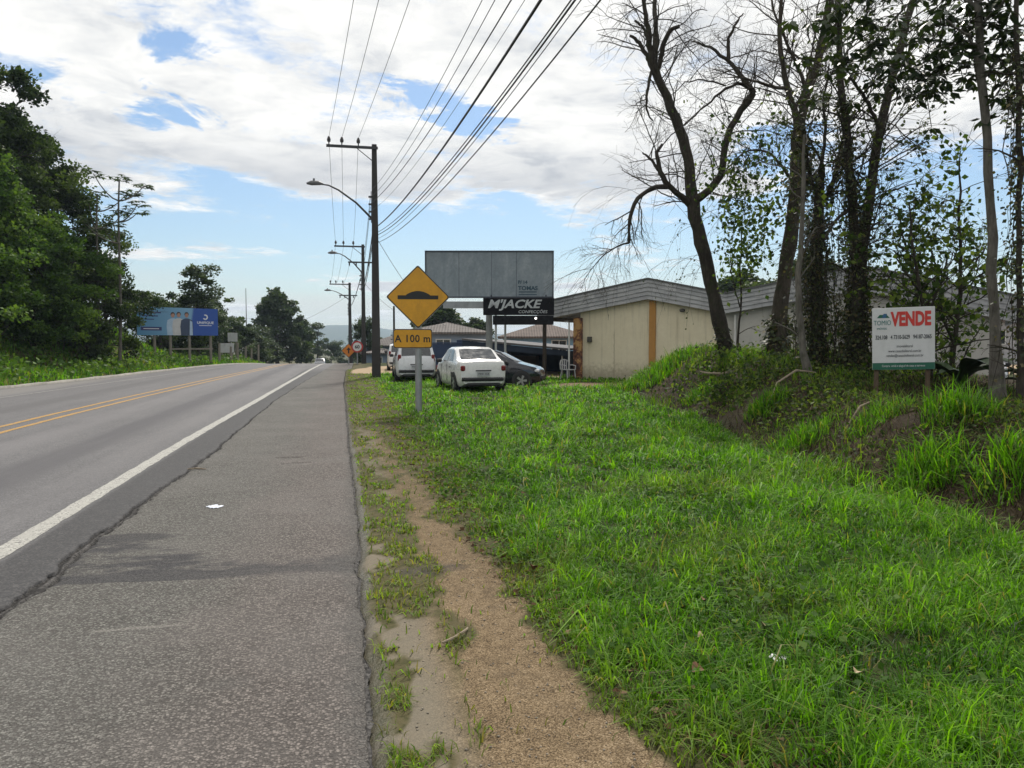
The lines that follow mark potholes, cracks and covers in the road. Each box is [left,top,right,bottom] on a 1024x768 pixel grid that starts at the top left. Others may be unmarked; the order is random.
crack [0,403,272,620]
